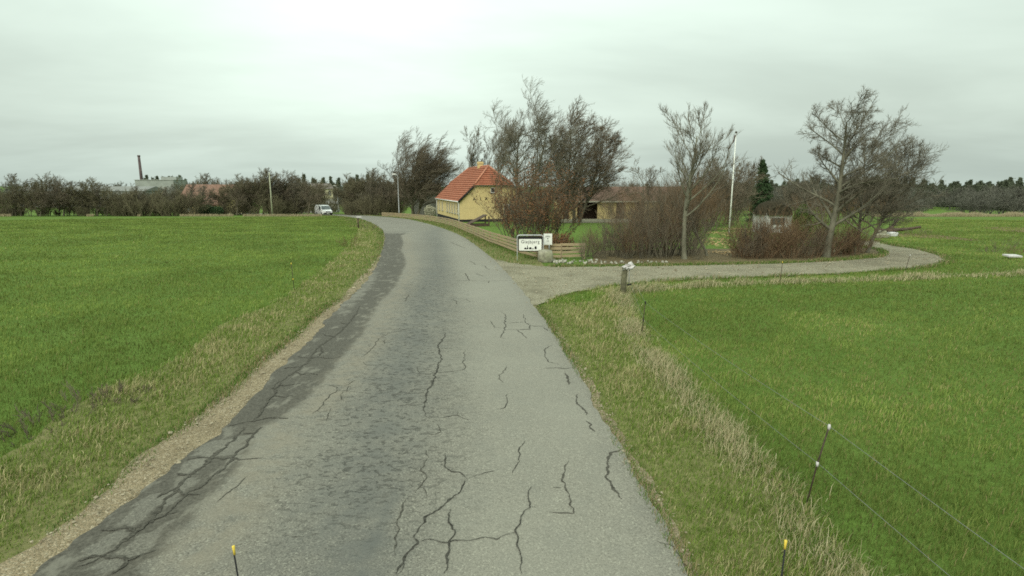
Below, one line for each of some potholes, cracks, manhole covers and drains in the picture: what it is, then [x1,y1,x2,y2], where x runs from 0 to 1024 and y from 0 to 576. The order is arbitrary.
crack [394,440,574,574]
crack [78,306,360,574]
crack [604,449,622,499]
crack [544,346,595,431]
crack [403,332,466,434]
